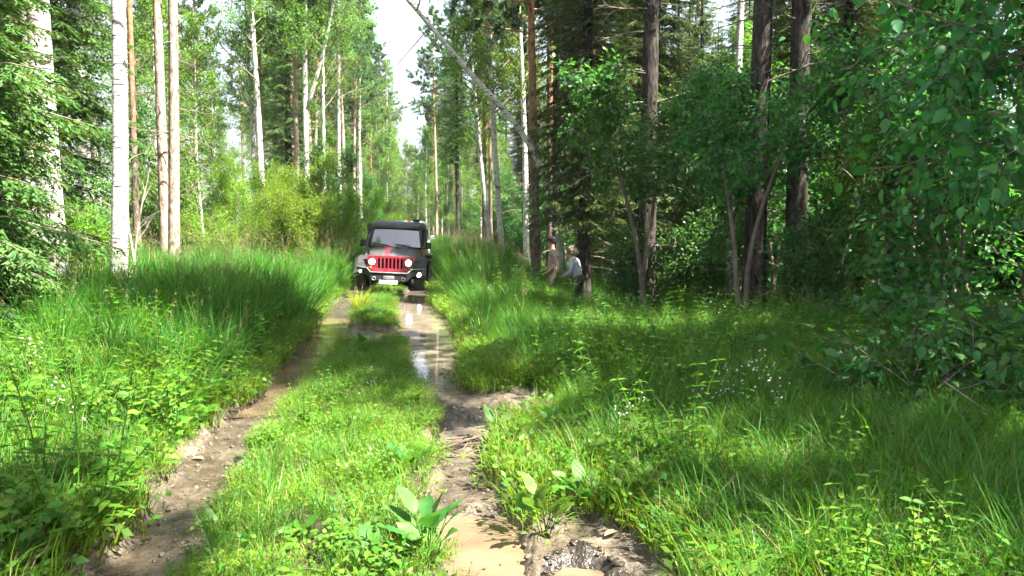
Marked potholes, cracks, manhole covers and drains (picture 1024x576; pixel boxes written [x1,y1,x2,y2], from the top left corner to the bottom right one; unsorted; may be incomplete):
pothole [543,539,635,576]
